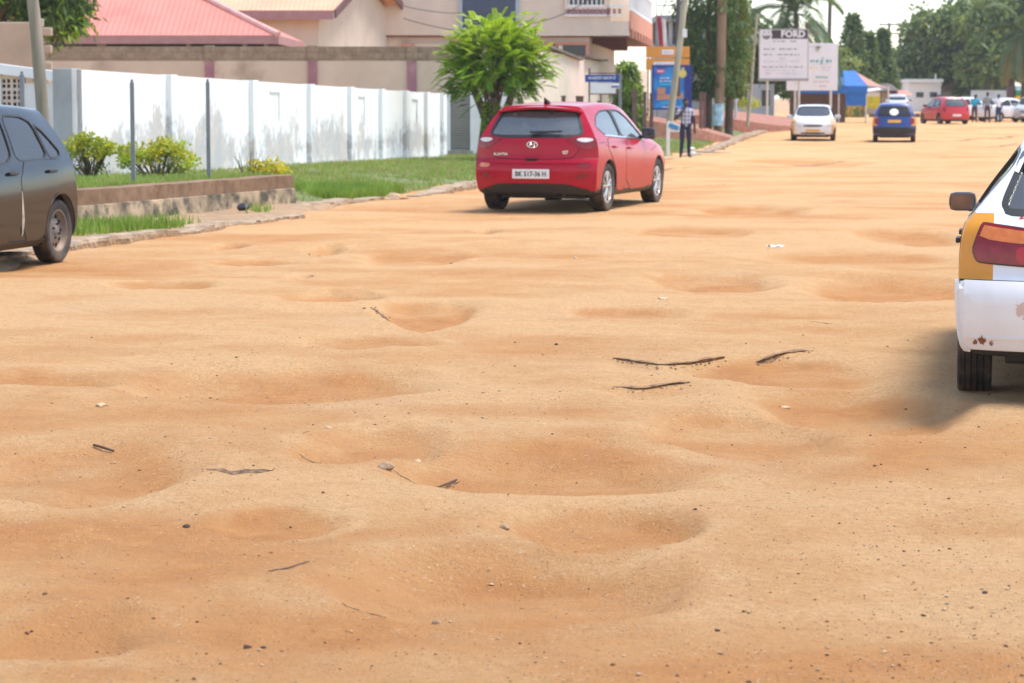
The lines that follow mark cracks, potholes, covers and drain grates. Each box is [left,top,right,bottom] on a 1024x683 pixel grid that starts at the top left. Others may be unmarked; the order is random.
pothole [285,422,452,464]
pothole [638,269,787,293]
pothole [836,224,961,247]
pothole [374,440,723,496]
pothole [366,298,488,333]
pothole [786,270,955,303]
pothole [191,499,355,542]
pothole [480,497,709,555]
pothole [627,224,755,238]
pothole [0,430,220,510]
